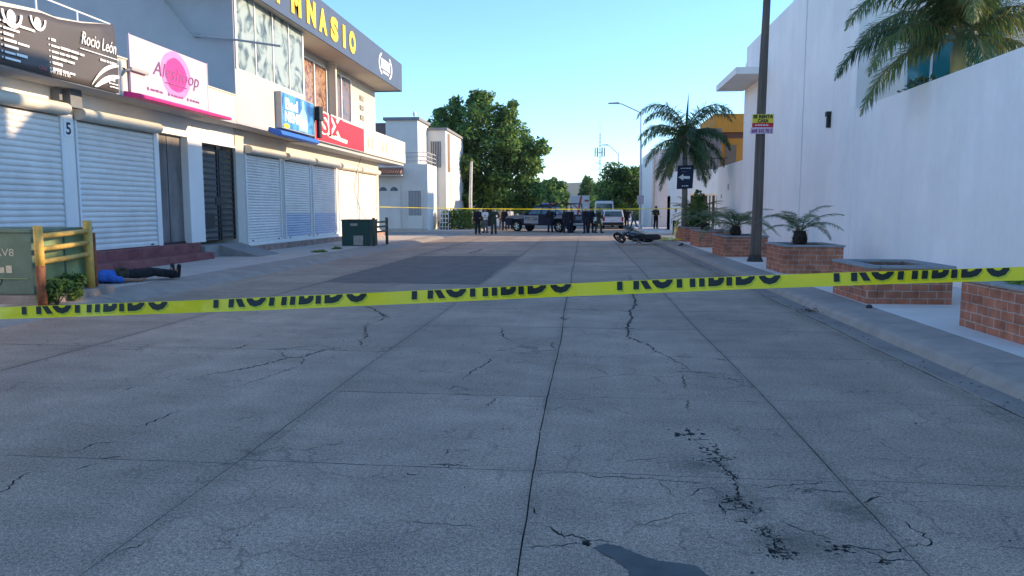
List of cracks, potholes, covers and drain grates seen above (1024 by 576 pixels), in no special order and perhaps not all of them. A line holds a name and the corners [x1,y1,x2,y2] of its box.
crack [618,275,754,410]
crack [521,508,610,549]
crack [765,518,933,568]
crack [537,457,889,526]
crack [1,410,184,492]
crack [450,327,514,406]
crack [202,306,389,385]
